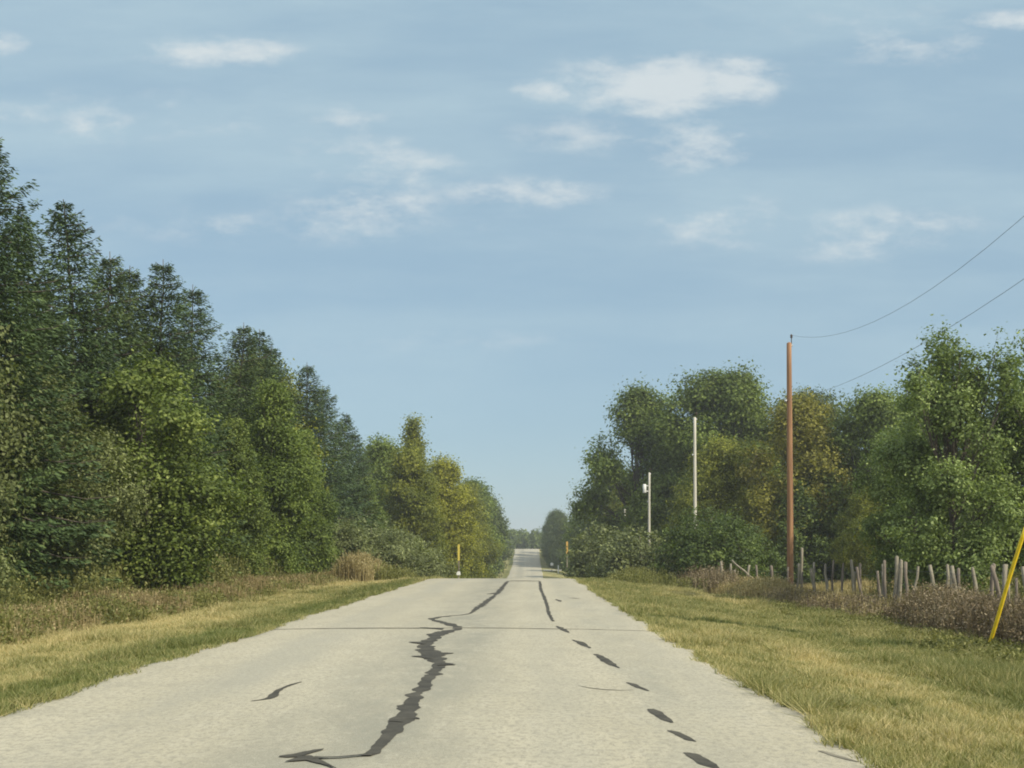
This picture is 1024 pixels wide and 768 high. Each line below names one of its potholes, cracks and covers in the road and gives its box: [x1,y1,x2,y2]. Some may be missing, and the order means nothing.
crack [304,581,642,632]
crack [252,682,300,701]
